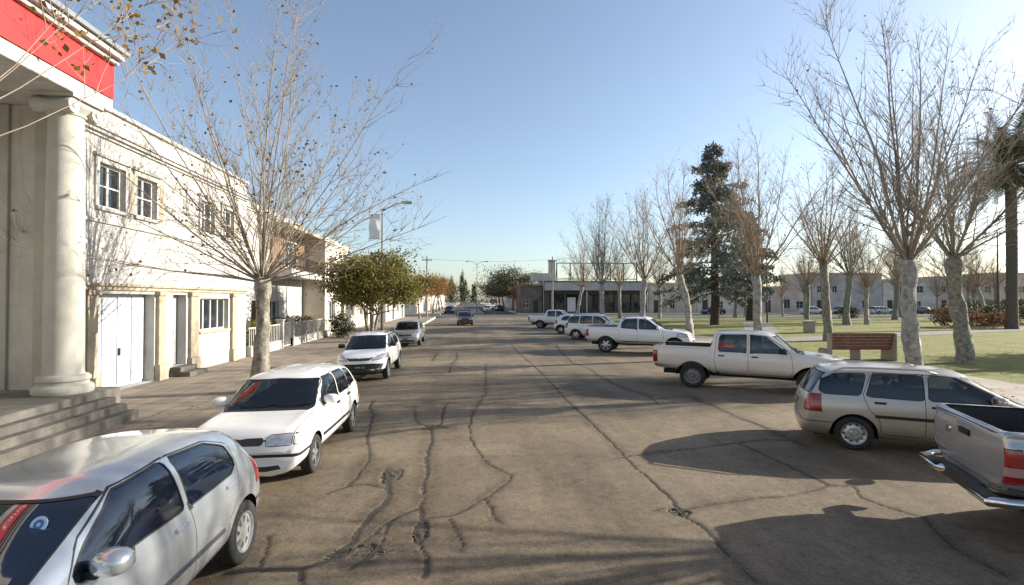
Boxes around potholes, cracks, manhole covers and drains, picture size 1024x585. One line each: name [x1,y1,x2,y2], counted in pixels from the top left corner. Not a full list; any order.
pothole [380,469,403,484]
crack [618,396,1004,575]
pothole [411,524,428,543]
crack [224,364,511,585]
pothole [326,543,385,563]
